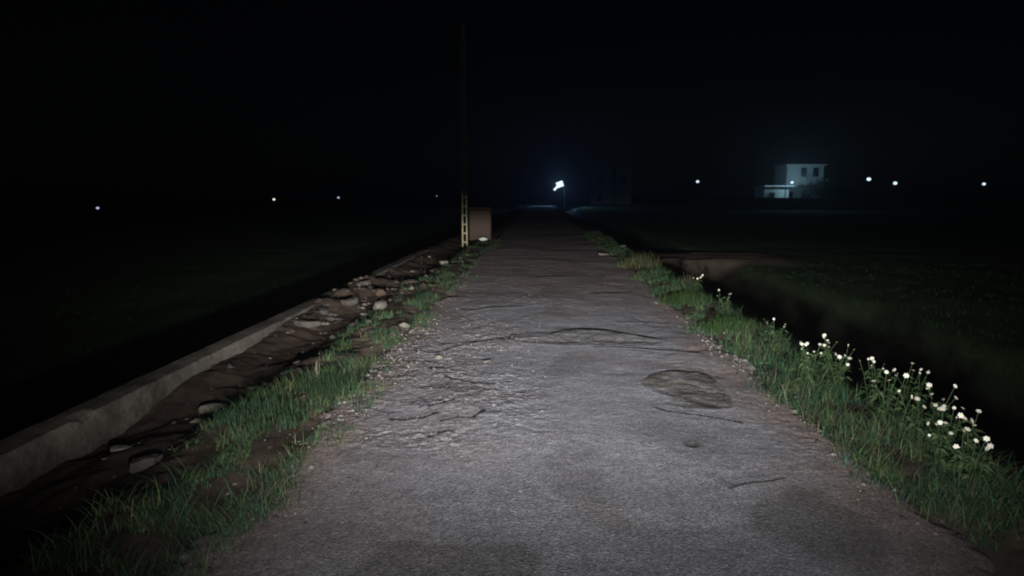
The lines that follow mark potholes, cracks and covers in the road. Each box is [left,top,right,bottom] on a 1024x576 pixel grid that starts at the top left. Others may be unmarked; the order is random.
crack [643,404,754,428]
pothole [628,369,750,415]
crack [587,346,721,355]
pothole [673,435,714,453]
crack [714,470,803,496]
crack [374,335,536,442]
